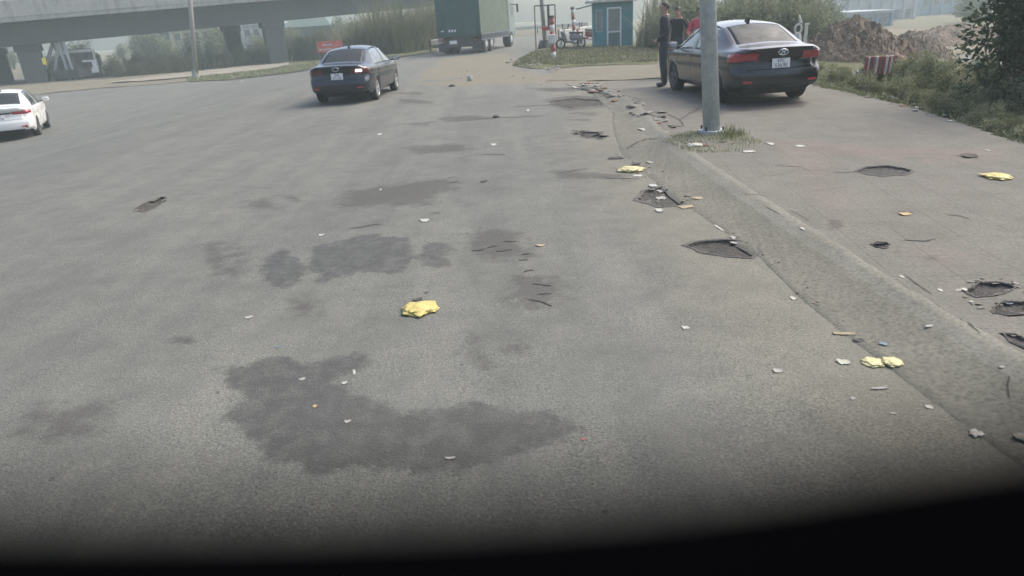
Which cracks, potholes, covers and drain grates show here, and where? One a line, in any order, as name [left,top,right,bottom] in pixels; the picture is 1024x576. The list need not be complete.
pothole [571,130,610,139]
pothole [633,185,691,207]
pothole [682,238,761,259]
pothole [991,300,1024,317]
pothole [963,281,1017,298]
pothole [132,196,167,213]
pothole [854,165,914,177]
pothole [548,98,606,108]
crack [472,241,552,306]
